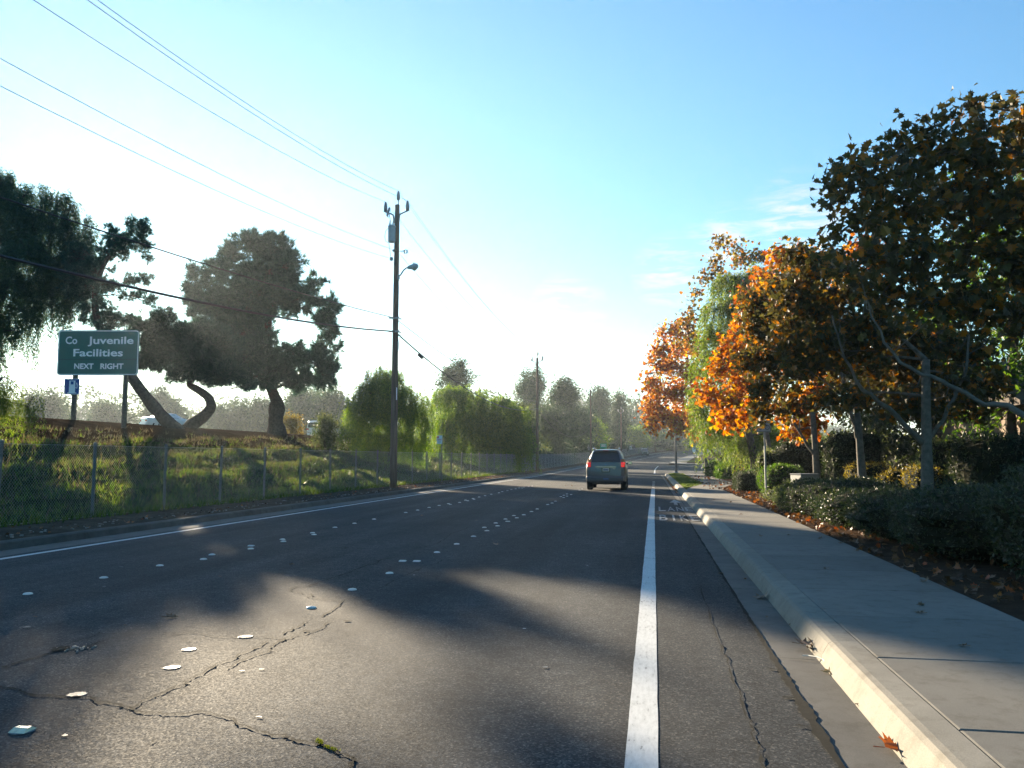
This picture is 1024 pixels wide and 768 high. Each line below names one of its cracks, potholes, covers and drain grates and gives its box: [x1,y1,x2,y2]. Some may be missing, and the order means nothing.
crack [656,582,765,768]
crack [0,510,473,768]
